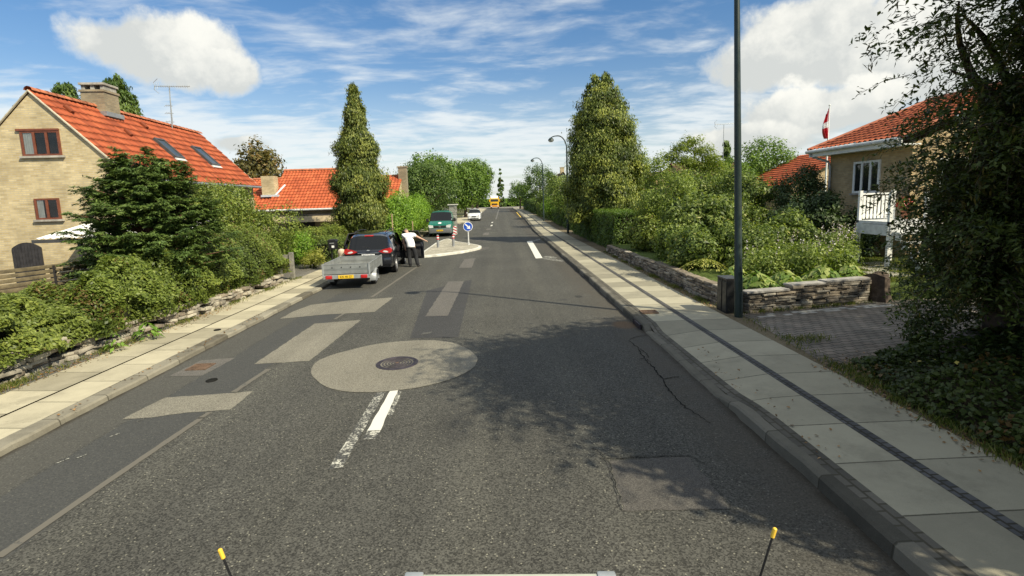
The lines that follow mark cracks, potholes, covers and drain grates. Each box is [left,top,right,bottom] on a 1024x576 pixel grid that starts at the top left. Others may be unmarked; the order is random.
crack [628,335,710,423]
manhole cover [376,356,418,370]
